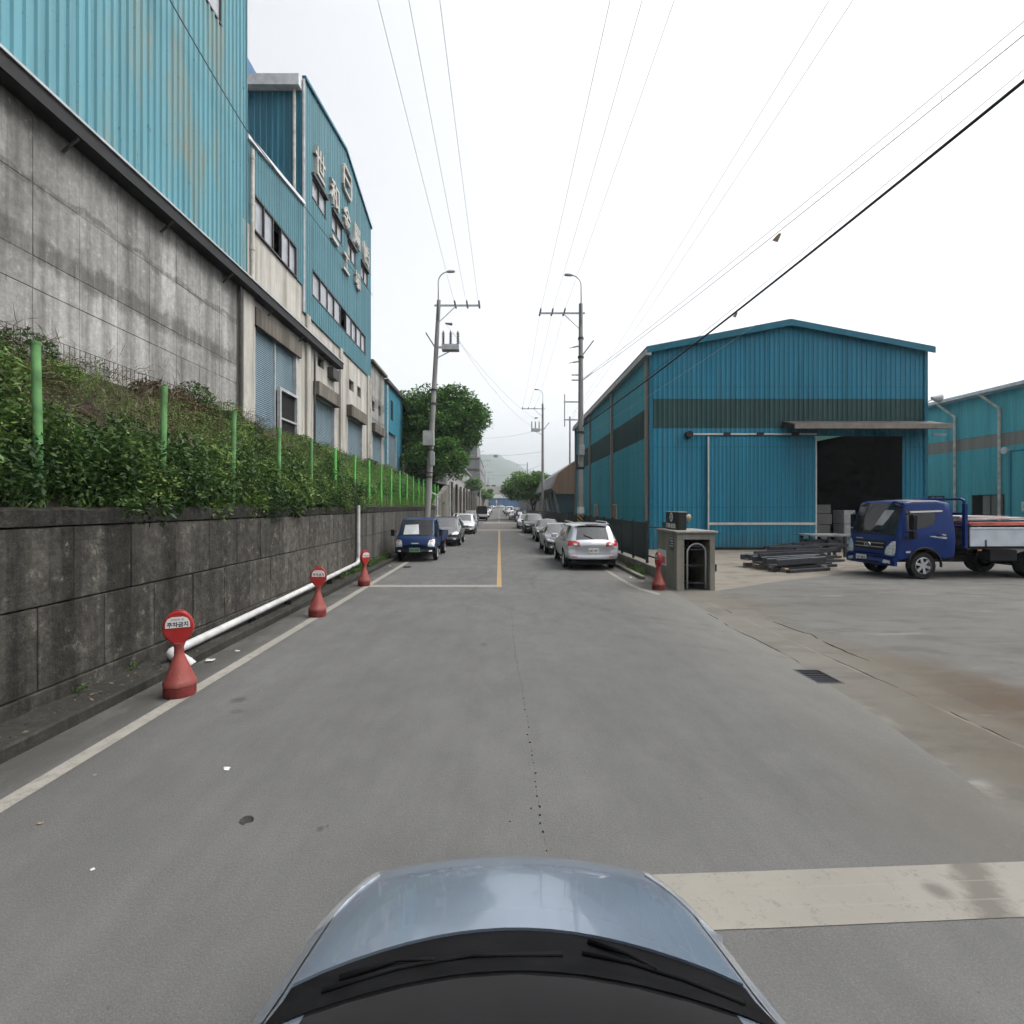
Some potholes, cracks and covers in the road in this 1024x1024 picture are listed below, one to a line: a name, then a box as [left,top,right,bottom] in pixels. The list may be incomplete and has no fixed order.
drain grate [793,669,844,683]
